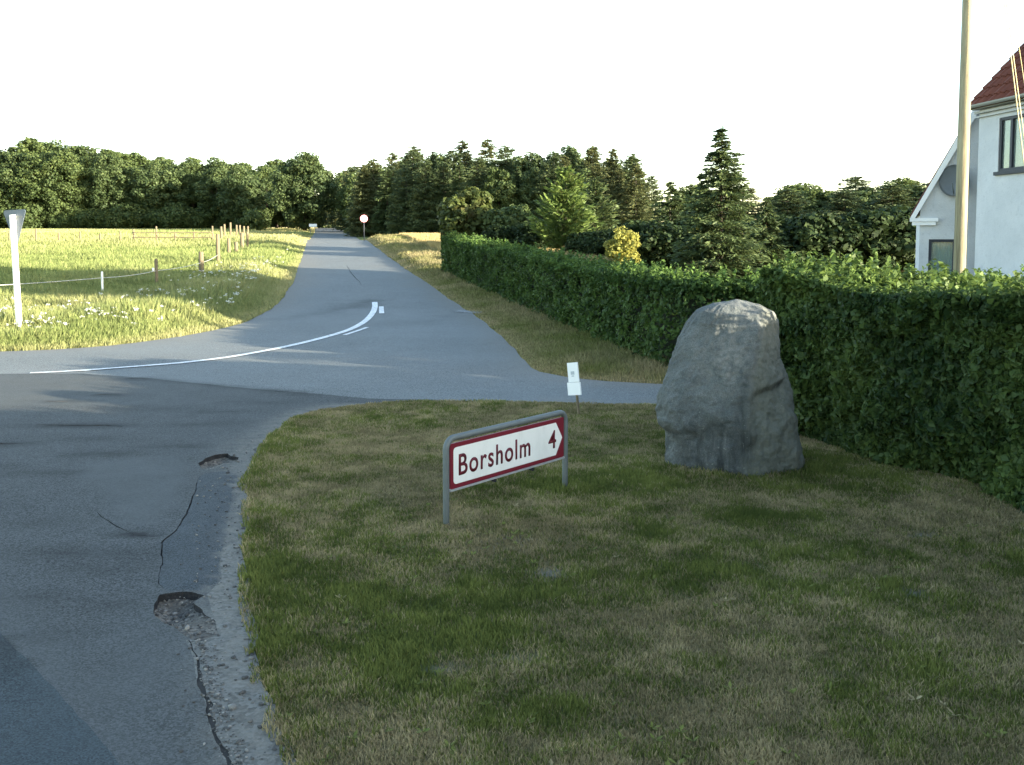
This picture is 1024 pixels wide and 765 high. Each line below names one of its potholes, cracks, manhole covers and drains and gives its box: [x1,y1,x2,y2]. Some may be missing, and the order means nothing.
pothole [198,453,239,470]
crack [97,477,200,587]
crack [188,640,233,765]
pothole [153,592,218,641]
